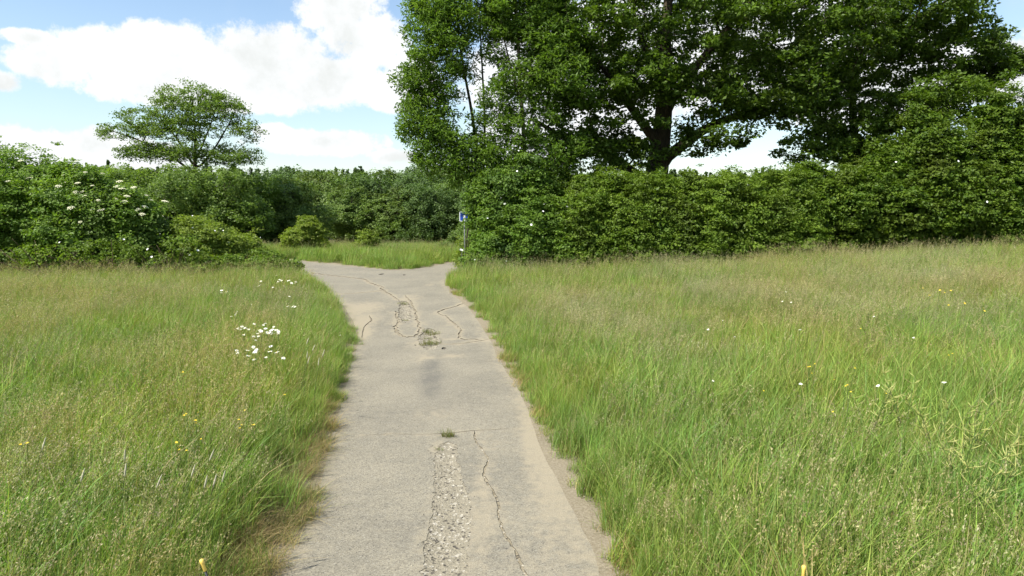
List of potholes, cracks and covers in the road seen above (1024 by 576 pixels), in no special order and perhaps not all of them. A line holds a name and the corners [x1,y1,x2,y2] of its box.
pothole [395,301,415,323]
crack [313,273,488,344]
pothole [411,438,475,576]
pothole [413,328,442,351]
crack [374,428,528,576]
